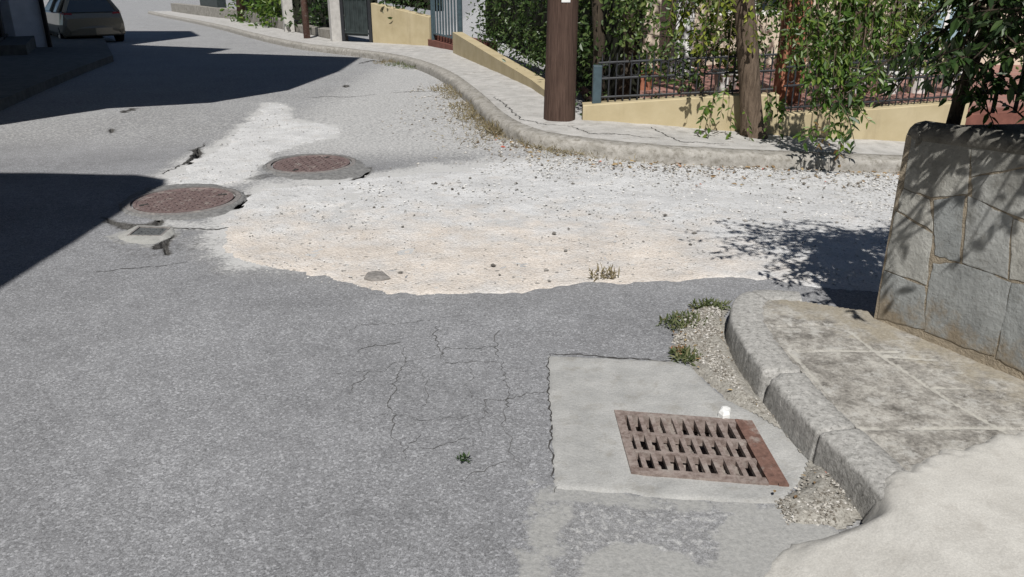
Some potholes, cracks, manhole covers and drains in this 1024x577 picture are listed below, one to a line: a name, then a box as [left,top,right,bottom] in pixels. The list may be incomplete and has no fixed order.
crack [162,143,205,174]
manhole cover [119,183,247,221]
manhole cover [262,154,371,180]
utility cover [118,225,175,244]
crack [310,315,542,481]
drain grate [614,410,789,487]
